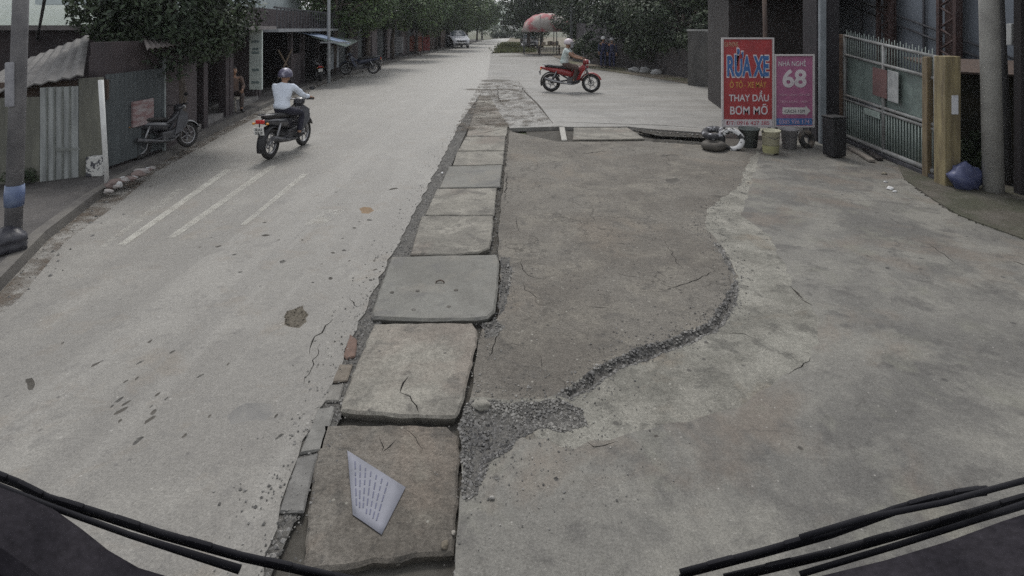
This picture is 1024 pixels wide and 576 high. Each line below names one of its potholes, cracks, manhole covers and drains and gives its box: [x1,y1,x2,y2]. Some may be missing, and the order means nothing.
crack [656,243,711,291]
crack [304,319,333,379]
pothole [457,398,588,502]
crack [400,376,418,410]
